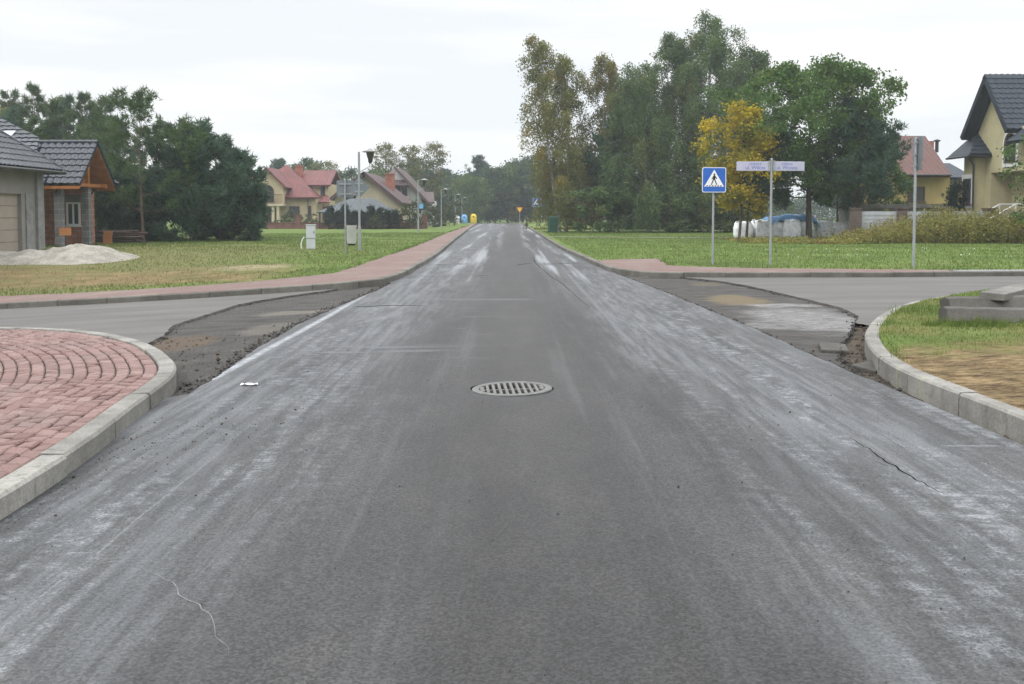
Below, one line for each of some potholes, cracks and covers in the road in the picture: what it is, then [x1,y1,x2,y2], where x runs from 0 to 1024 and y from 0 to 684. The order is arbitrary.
crack [79,566,229,648]
crack [848,437,948,495]
